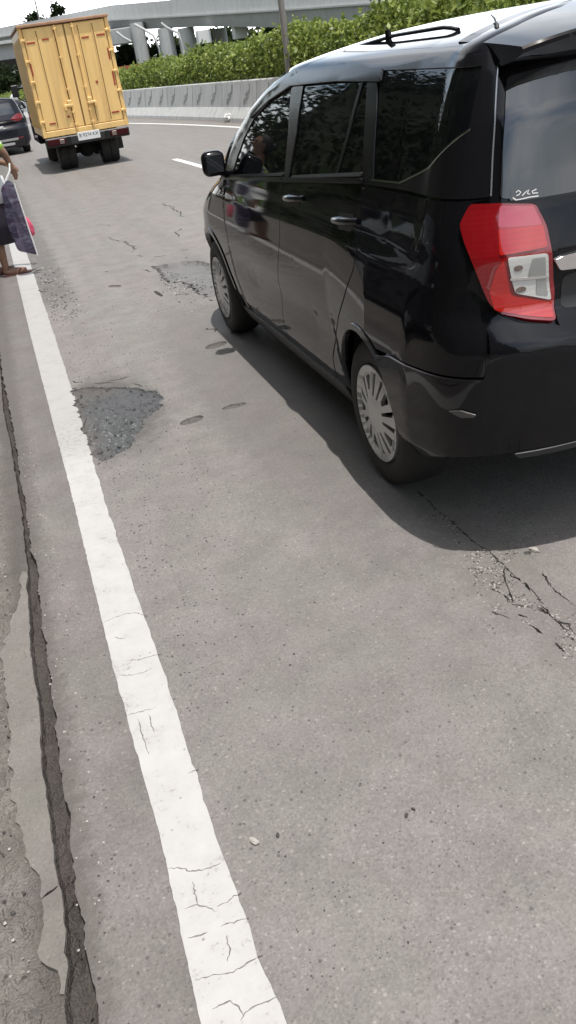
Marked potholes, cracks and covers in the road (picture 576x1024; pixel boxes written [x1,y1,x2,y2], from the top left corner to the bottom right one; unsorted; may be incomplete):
crack [127,709,154,754]
crack [168,863,262,979]
pothole [150,261,215,300]
crack [417,492,575,652]
crack [213,997,277,1019]
pothole [71,377,164,465]
